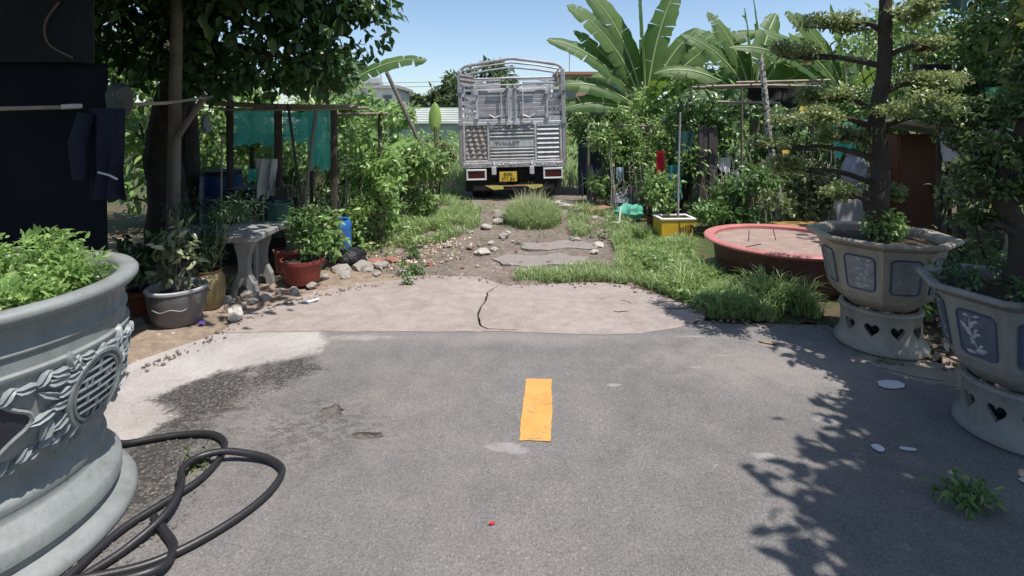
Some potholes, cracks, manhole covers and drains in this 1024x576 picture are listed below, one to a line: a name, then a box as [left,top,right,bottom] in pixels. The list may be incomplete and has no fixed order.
pothole [320,404,343,420]
crack [477,286,513,330]
